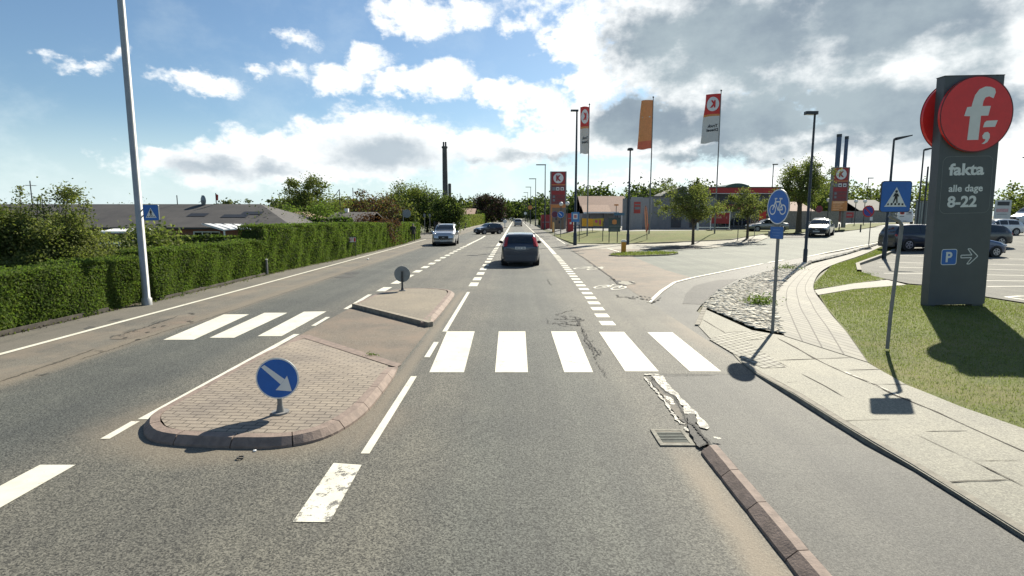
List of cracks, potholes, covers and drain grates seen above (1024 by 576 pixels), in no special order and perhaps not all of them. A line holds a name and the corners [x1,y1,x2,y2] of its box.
crack [546,310,606,376]
crack [647,374,713,446]
